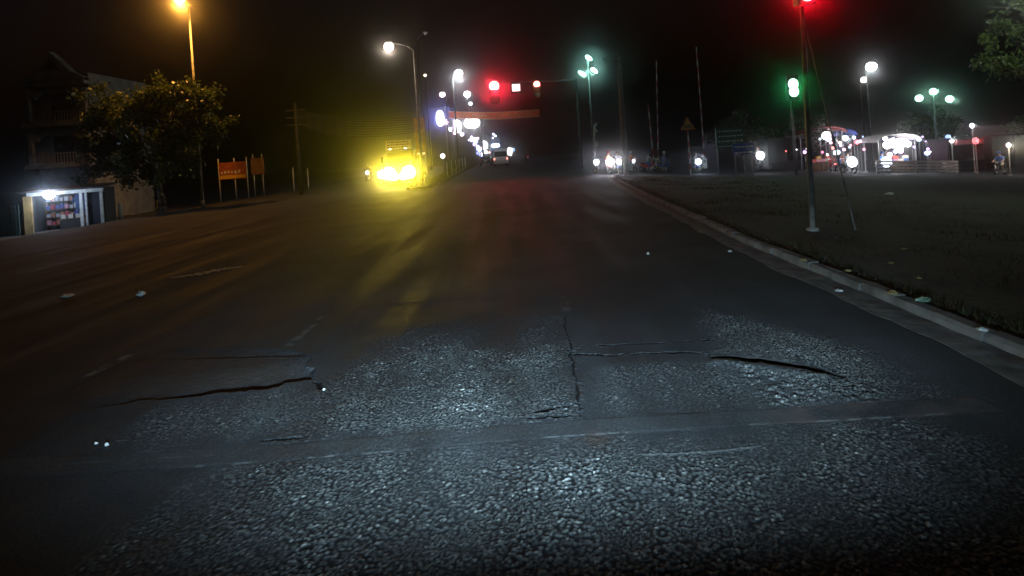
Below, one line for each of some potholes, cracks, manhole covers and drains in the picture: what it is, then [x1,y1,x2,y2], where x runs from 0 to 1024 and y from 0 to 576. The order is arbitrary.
crack [525,403,582,420]
crack [559,339,722,357]
crack [311,381,325,390]
crack [258,434,309,443]
